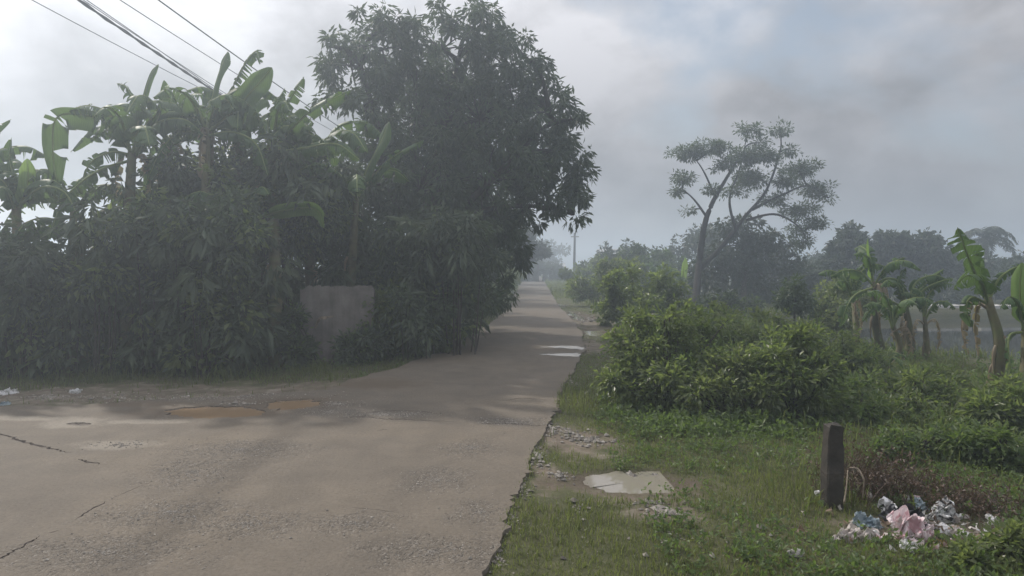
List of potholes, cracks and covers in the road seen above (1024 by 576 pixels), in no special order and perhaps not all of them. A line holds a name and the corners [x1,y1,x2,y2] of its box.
pothole [163,405,266,419]
pothole [259,399,321,411]
crack [0,434,100,465]
crack [0,482,150,559]
